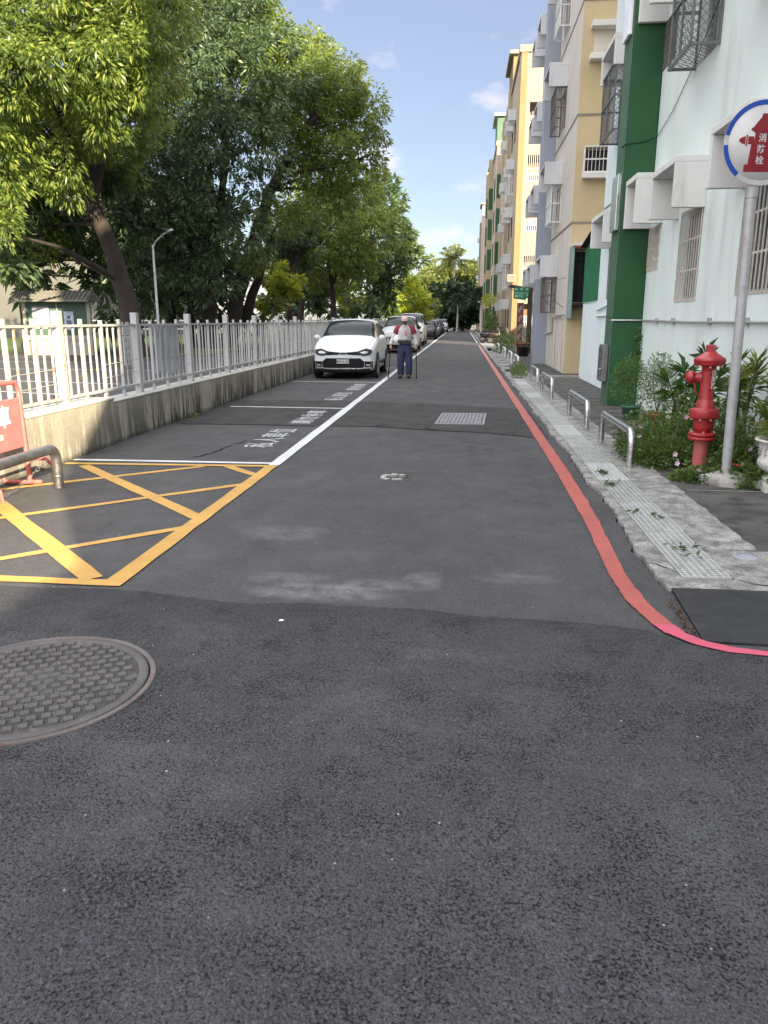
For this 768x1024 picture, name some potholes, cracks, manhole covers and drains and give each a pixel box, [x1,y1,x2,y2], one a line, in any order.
manhole cover [0,636,156,747]
crack [182,423,534,458]
